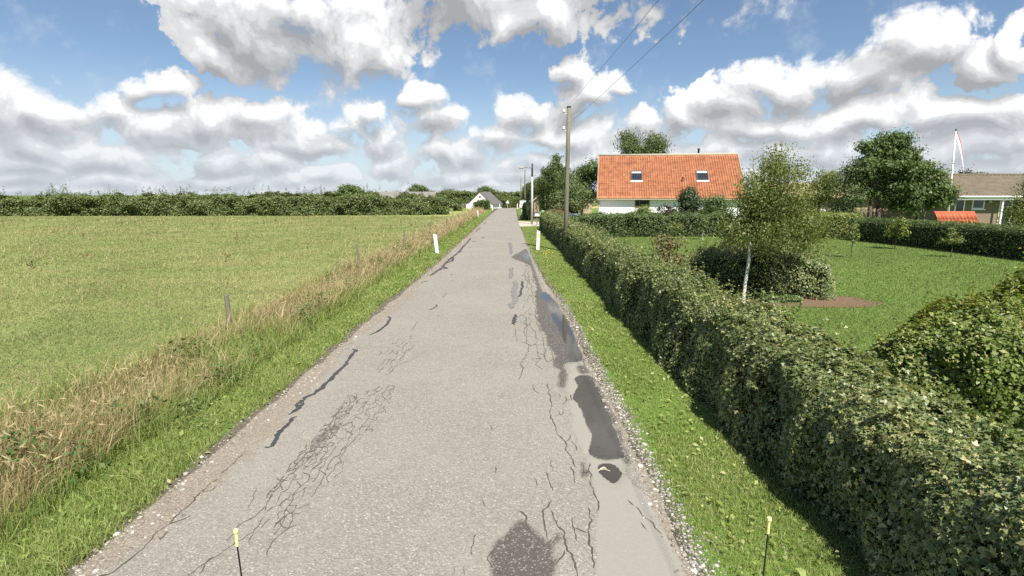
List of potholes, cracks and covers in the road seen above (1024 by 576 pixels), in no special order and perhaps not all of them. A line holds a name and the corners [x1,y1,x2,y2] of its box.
crack [515,262,600,575]
crack [99,453,243,576]
crack [190,385,395,574]
